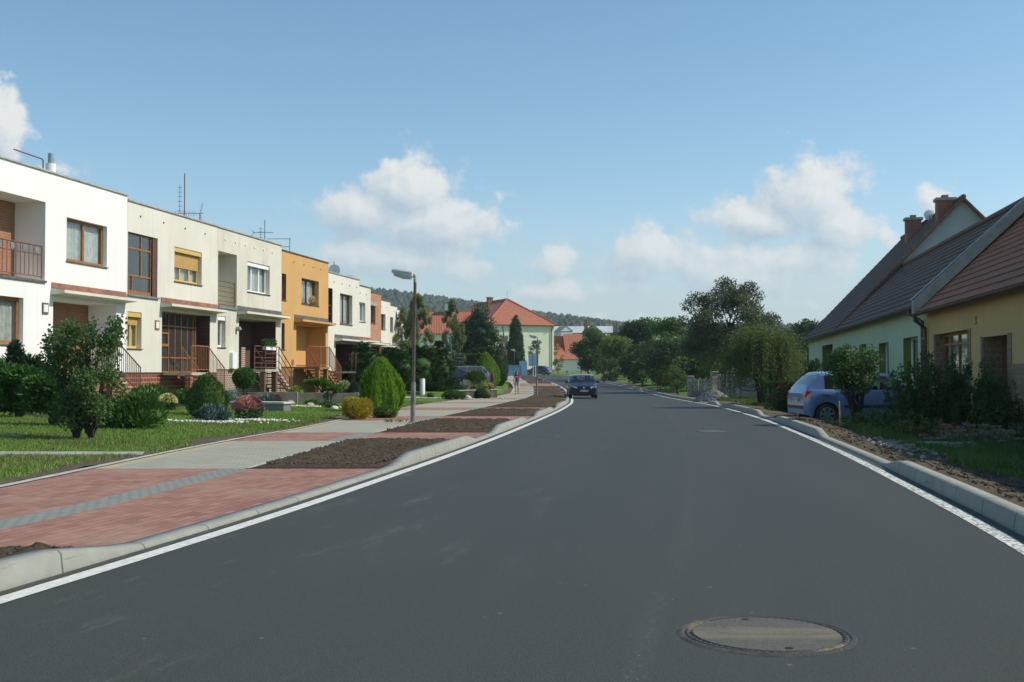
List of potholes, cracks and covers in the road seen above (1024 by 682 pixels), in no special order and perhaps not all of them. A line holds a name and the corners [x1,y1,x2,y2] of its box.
manhole cover [677,615,858,657]
